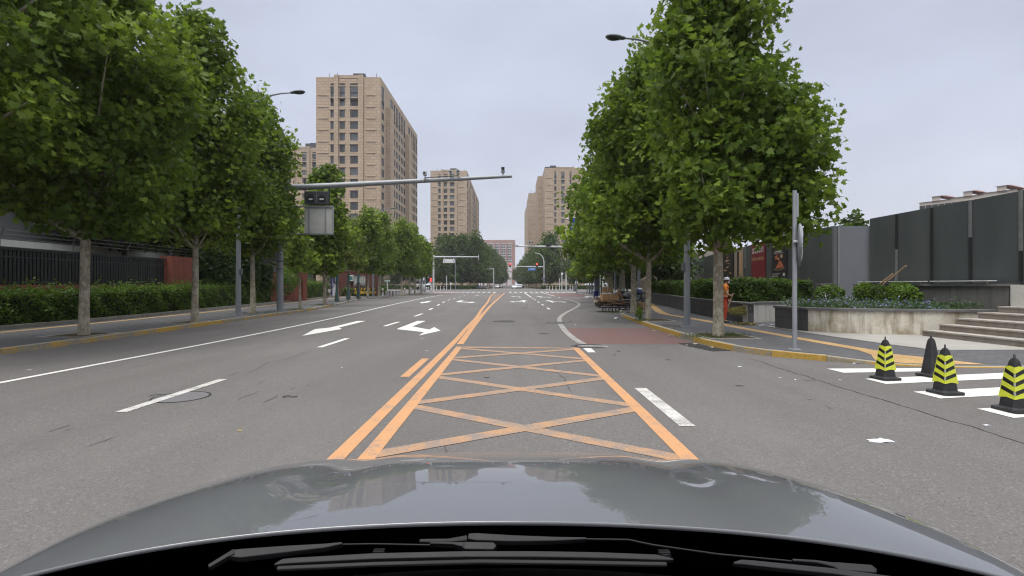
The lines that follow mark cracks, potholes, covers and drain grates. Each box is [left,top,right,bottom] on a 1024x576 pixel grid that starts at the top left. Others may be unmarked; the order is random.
manhole cover [149,391,211,403]
